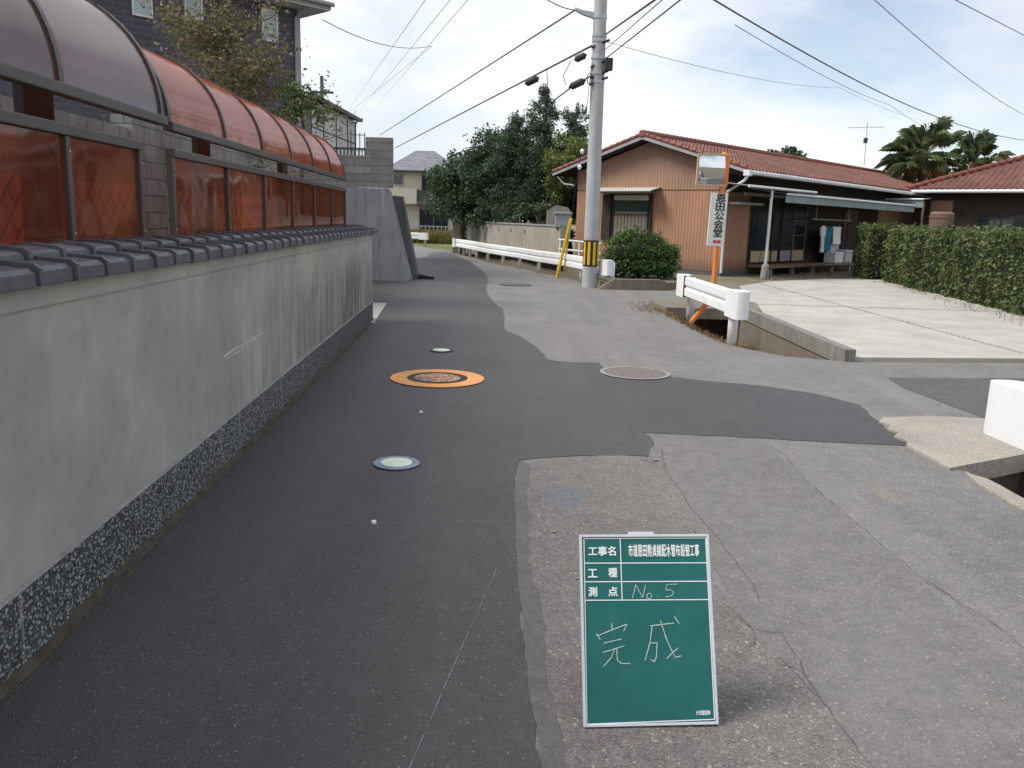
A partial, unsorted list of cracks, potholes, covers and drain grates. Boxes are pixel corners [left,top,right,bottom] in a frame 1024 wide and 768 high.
manhole cover [600,366,670,379]
crack [765,441,1023,647]
manhole cover [390,369,484,387]
crack [731,609,874,768]
utility cover [373,456,420,470]
crack [661,449,759,599]
